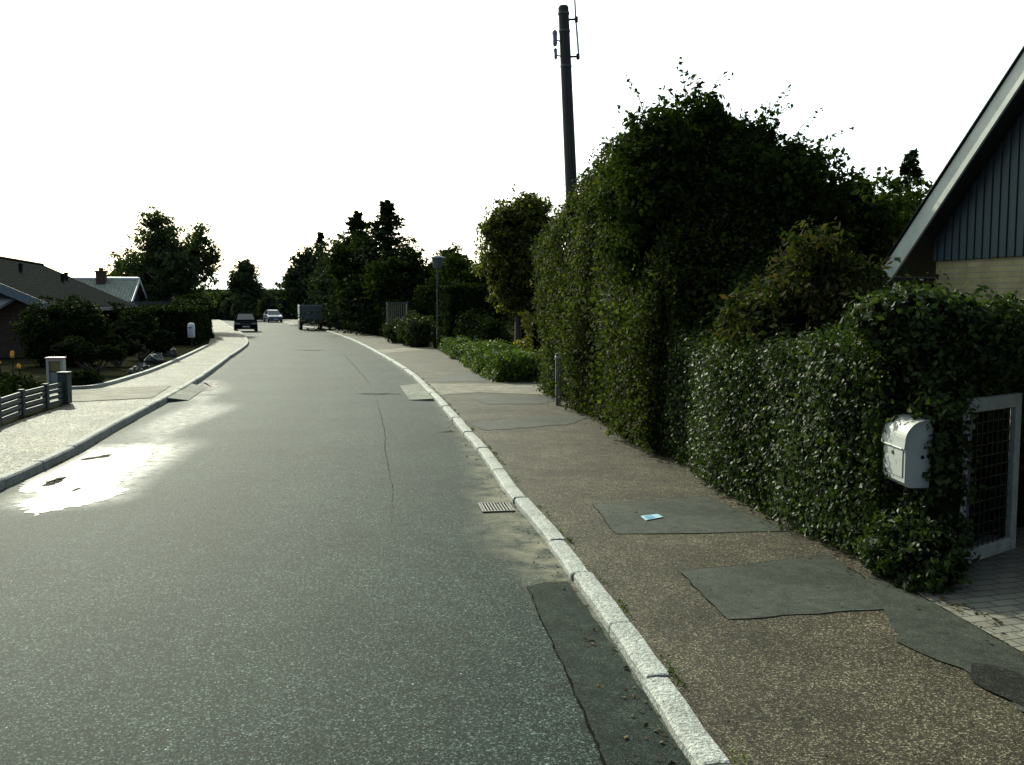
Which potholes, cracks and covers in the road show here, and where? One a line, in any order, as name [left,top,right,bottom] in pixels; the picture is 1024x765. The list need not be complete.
drain grate [477,502,515,513]
